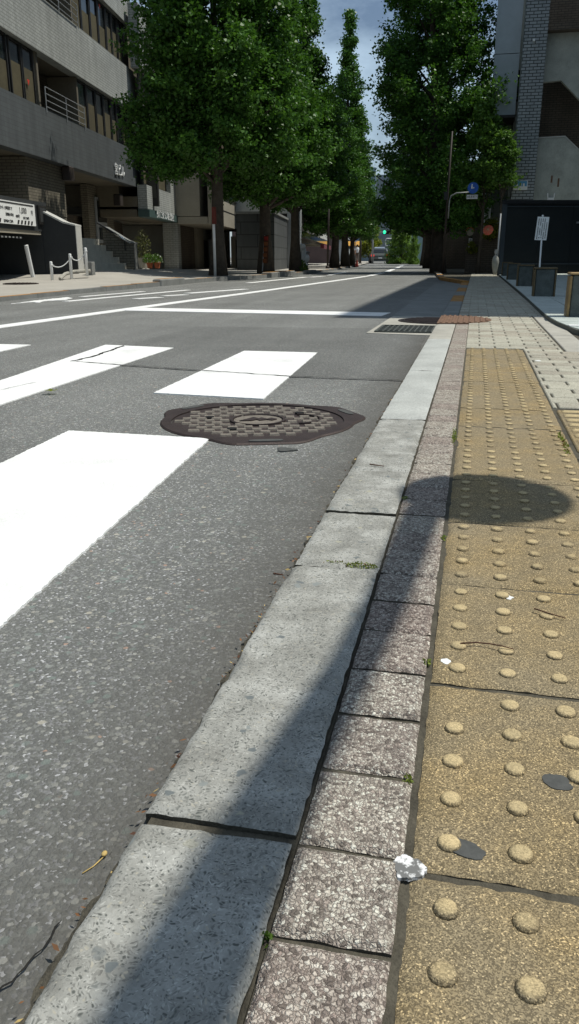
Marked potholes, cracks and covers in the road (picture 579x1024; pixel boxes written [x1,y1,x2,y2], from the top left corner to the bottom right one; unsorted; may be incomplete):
manhole cover [160,403,366,446]
drain grate [374,325,436,333]
crack [0,920,62,990]
